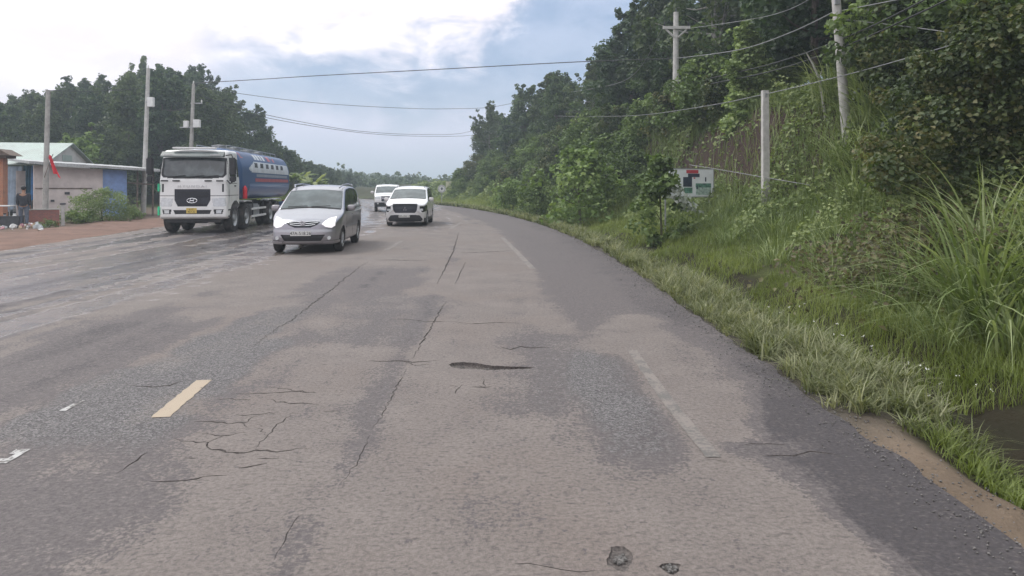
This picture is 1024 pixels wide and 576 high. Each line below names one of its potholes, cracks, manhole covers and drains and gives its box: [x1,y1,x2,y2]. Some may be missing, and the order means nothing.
crack [744,443,840,457]
pothole [659,563,681,575]
crack [517,563,598,572]
crack [274,236,513,560]
crack [116,387,339,482]
pothole [449,362,533,370]
pothole [607,546,633,572]
